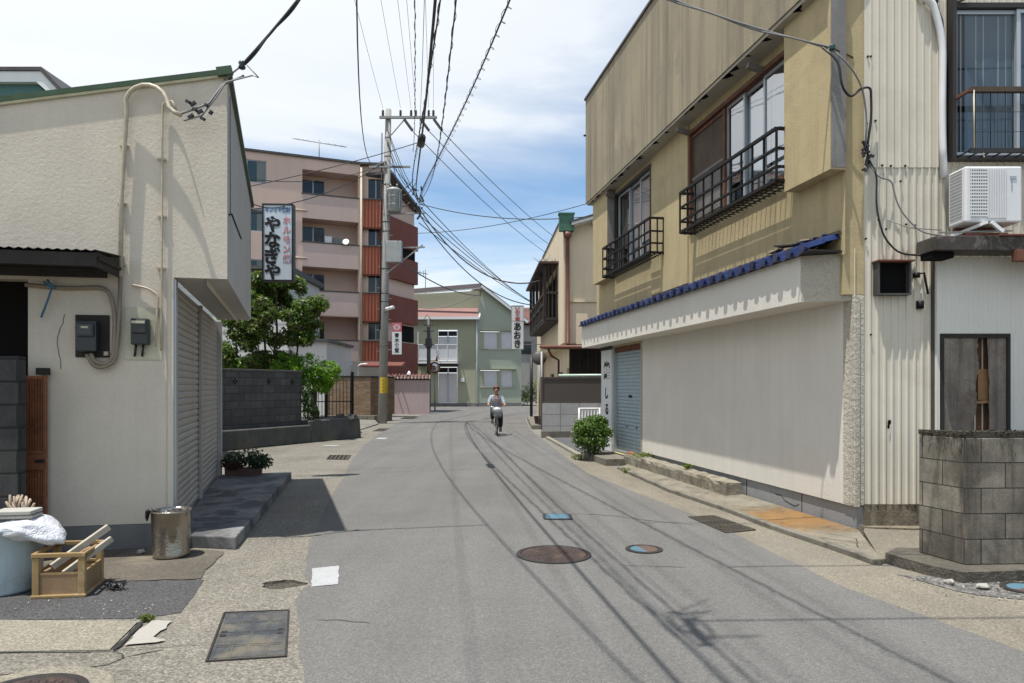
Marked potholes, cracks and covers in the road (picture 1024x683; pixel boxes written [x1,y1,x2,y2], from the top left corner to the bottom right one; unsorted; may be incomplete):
manhole cover [625,544,663,554]
manhole cover [516,545,591,564]
manhole cover [0,673,89,683]
pothole [262,580,309,589]
manhole cover [205,609,290,663]
drain grate [688,515,756,533]
manhole cover [999,581,1024,594]
